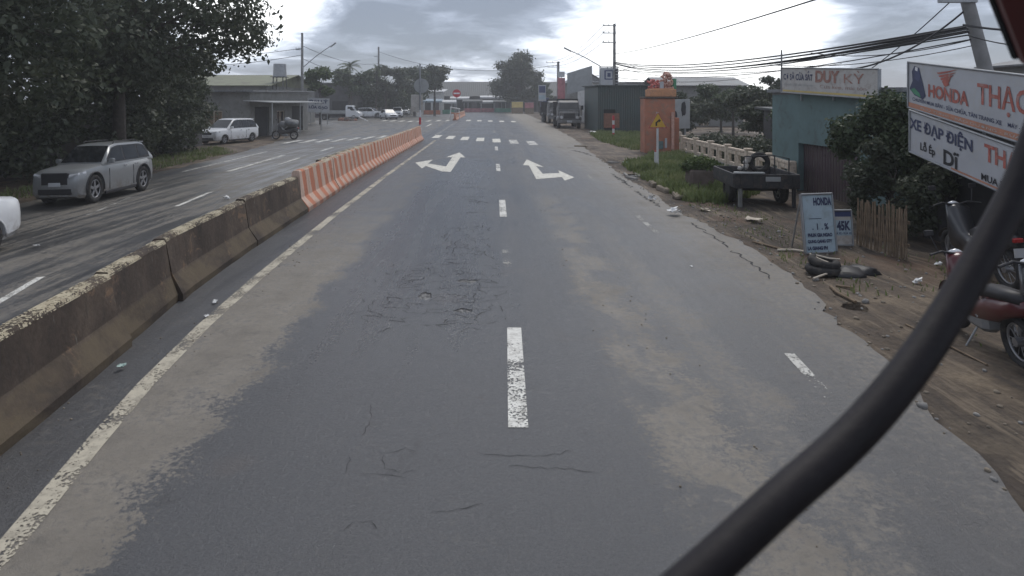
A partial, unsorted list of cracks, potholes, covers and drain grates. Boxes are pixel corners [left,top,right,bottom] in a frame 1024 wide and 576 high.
crack [613,174,660,207]
crack [692,223,770,279]
crack [352,187,507,332]
crack [487,450,596,472]
